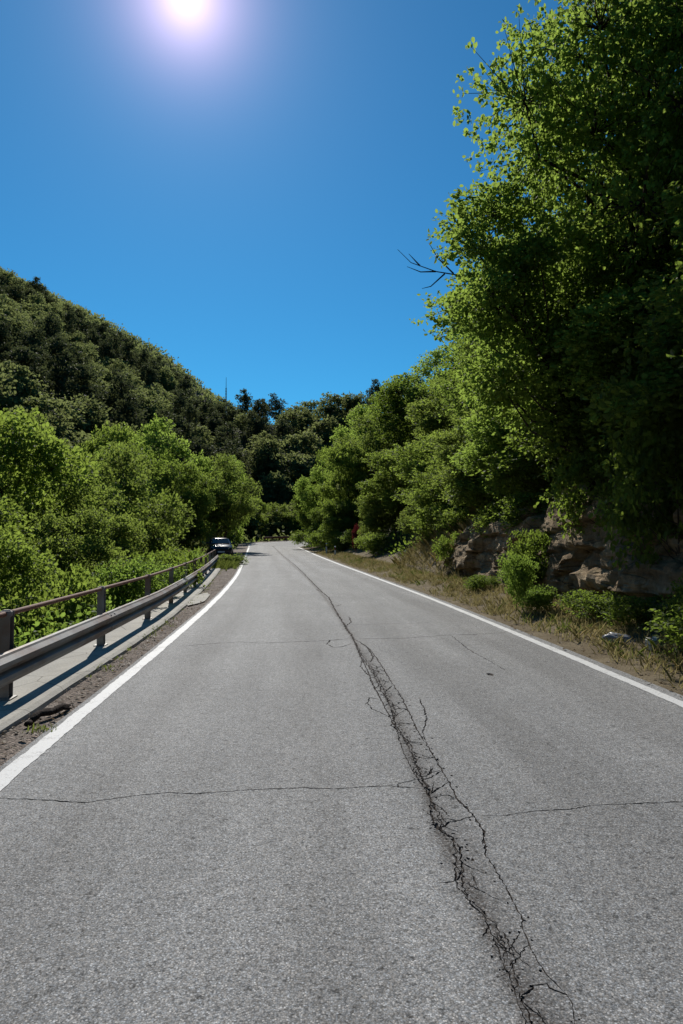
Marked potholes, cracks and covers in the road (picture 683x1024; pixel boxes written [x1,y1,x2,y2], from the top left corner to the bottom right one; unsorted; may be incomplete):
crack [6,544,683,1024]
